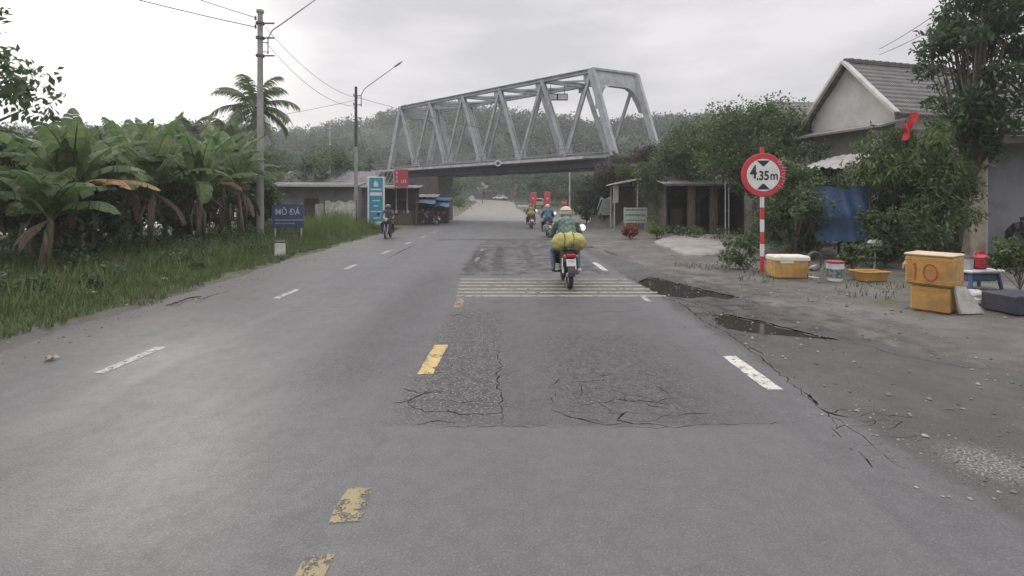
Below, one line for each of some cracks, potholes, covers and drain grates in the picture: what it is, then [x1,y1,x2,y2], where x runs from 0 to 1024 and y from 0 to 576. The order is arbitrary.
crack [825,406,960,463]
pothole [638,277,737,300]
crack [396,331,529,425]
crack [549,350,711,428]
pothole [712,314,838,340]
